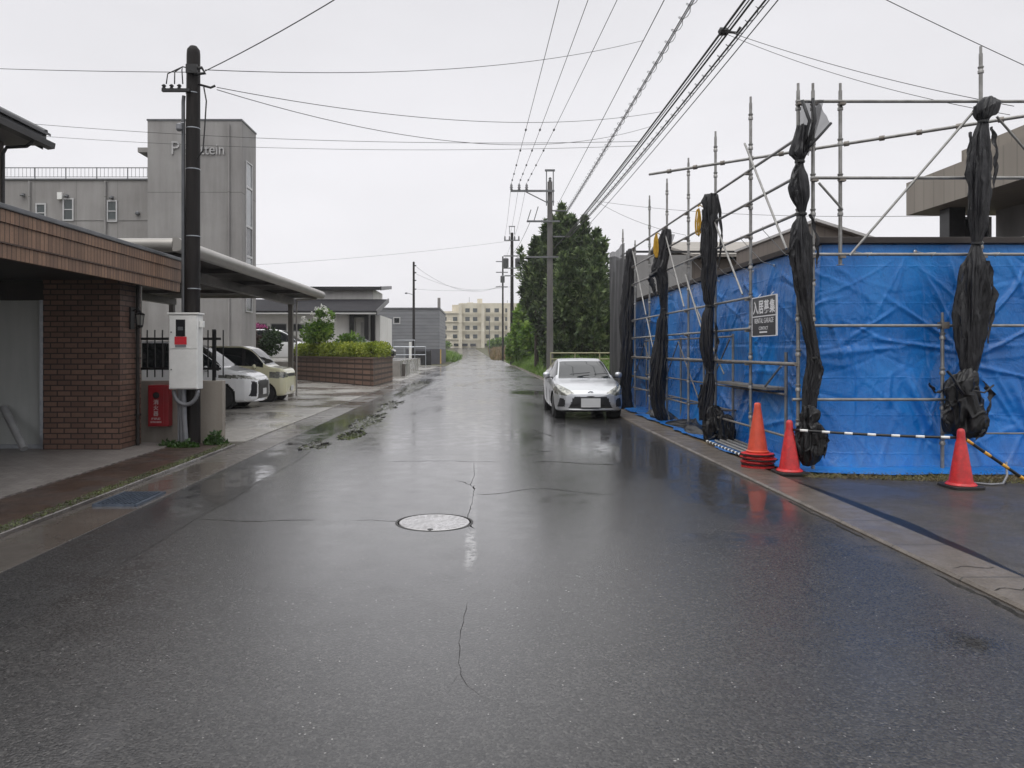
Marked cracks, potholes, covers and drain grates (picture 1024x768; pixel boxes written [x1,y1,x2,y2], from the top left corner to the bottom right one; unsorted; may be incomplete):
pothole [377,400,406,413]
crack [454,467,608,699]
pothole [298,440,332,450]
manhole cover [395,514,473,532]
pothole [333,428,367,440]
drain grate [92,491,166,507]
pothole [347,413,387,432]
